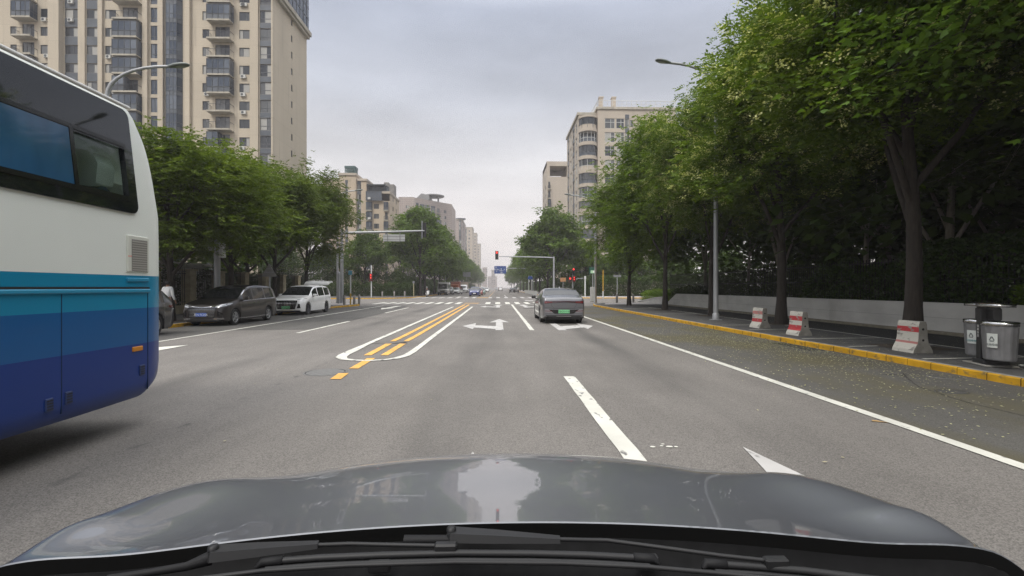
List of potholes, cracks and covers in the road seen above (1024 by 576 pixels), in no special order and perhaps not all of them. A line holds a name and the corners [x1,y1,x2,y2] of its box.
crack [889,373,1023,416]
manhole cover [303,368,347,376]
